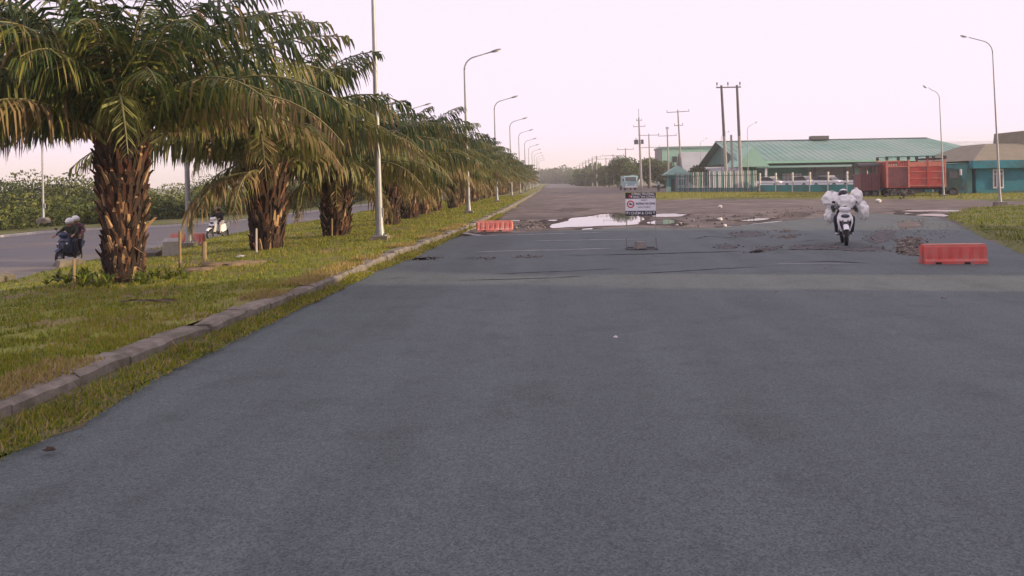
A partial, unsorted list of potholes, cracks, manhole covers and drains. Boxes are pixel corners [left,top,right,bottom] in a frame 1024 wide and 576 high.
crack [460,255,615,281]
